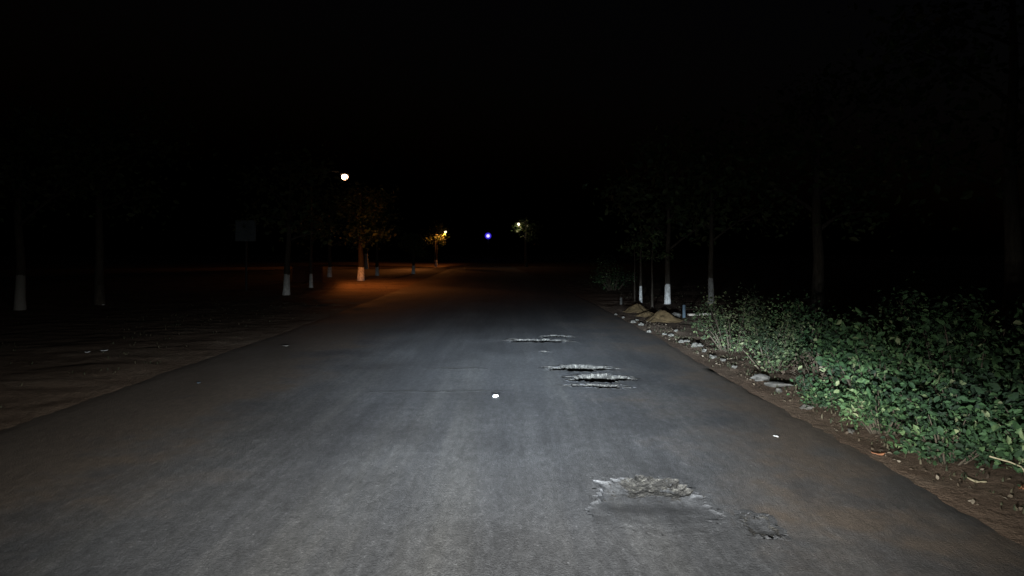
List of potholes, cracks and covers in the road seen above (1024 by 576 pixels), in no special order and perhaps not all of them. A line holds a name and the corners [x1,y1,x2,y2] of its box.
pothole [538,364,622,372]
pothole [733,509,793,541]
pothole [561,373,641,384]
pothole [576,473,735,540]
